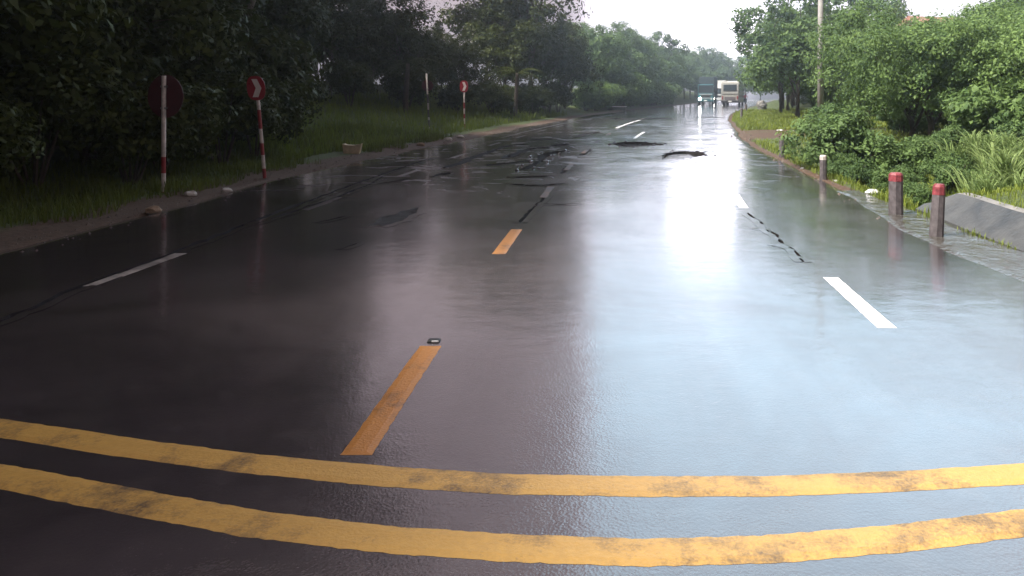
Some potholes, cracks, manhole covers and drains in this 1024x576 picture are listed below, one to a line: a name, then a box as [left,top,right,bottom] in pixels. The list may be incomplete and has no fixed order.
pothole [657,150,713,160]
crack [429,118,669,223]
crack [741,213,812,262]
pothole [359,205,426,228]
